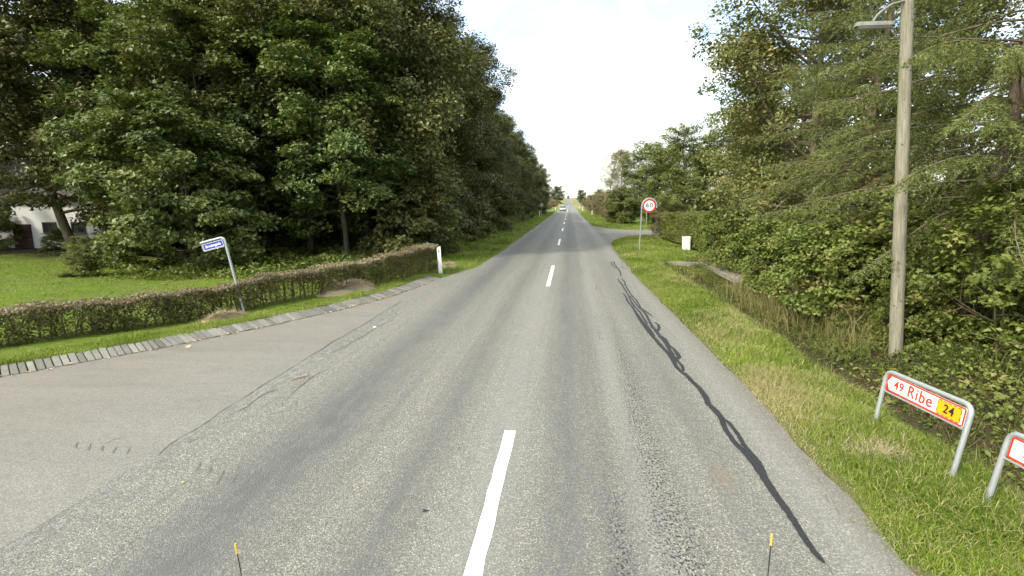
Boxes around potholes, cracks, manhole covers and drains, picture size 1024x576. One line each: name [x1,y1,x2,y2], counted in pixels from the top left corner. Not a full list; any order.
crack [195,461,249,487]
crack [75,437,130,453]
crack [160,301,401,454]
